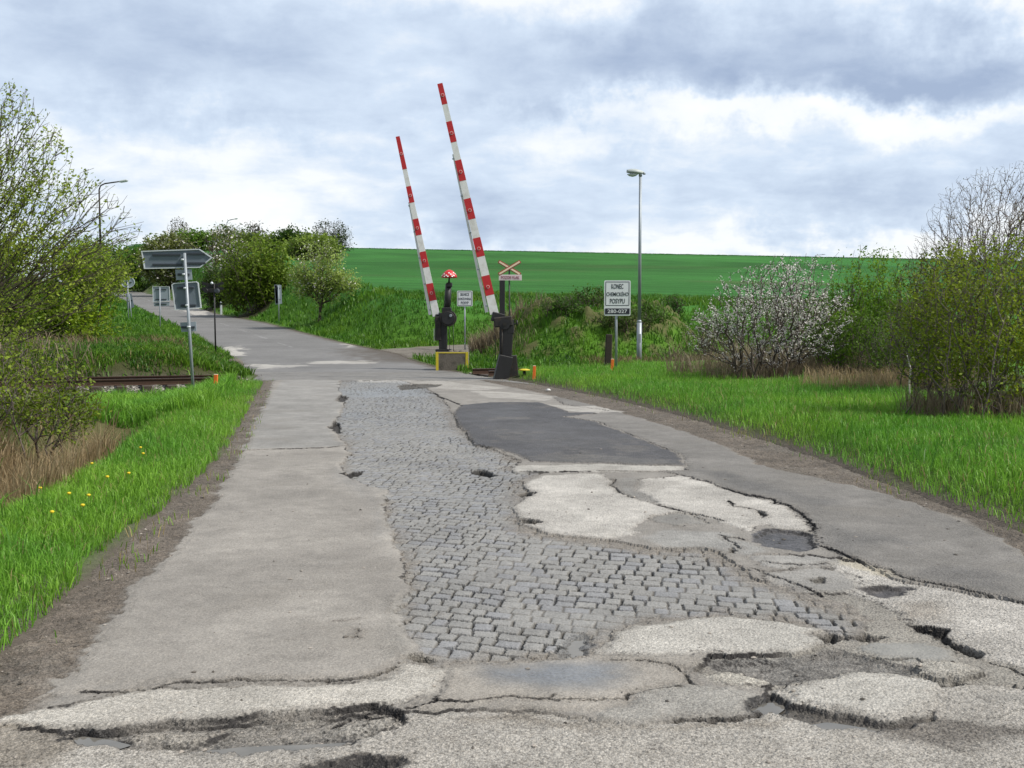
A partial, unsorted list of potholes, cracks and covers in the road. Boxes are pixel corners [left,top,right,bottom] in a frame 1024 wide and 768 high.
pothole [470,469,499,478]
pothole [853,584,920,599]
pothole [339,470,367,479]
pothole [700,647,923,688]
pothole [326,420,344,434]
pothole [53,701,408,754]
pothole [737,691,942,733]
pothole [747,527,822,552]
